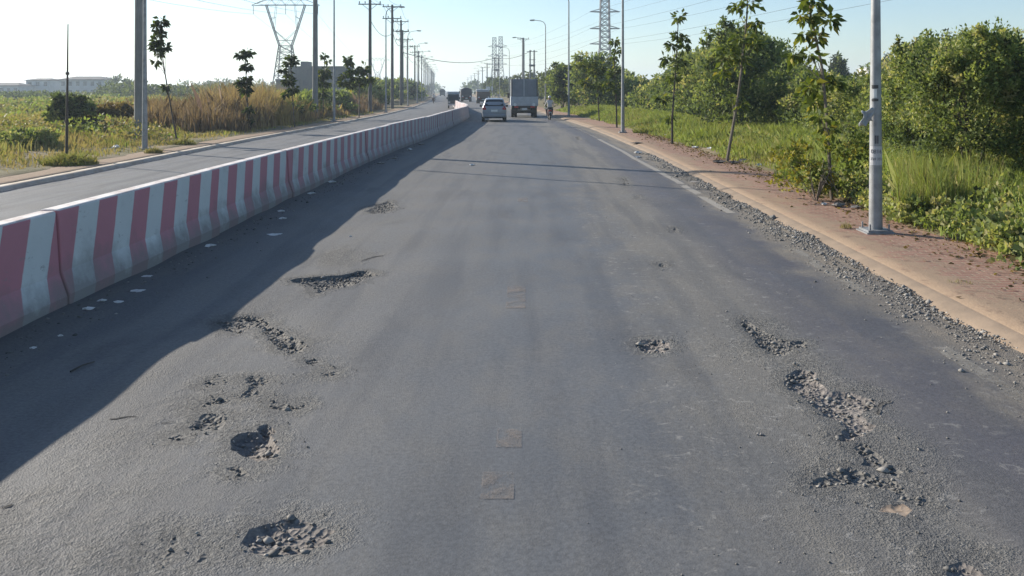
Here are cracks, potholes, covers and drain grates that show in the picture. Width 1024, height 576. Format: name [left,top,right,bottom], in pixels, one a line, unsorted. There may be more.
pothole [366,201,395,214]
pothole [241,514,335,557]
pothole [290,270,378,295]
pothole [635,339,671,353]
pothole [784,369,876,442]
pothole [217,315,308,354]
pothole [809,466,912,503]
pothole [854,443,903,478]
pothole [239,375,270,398]
pothole [230,424,280,462]
pothole [741,320,807,356]
pothole [189,413,227,431]
